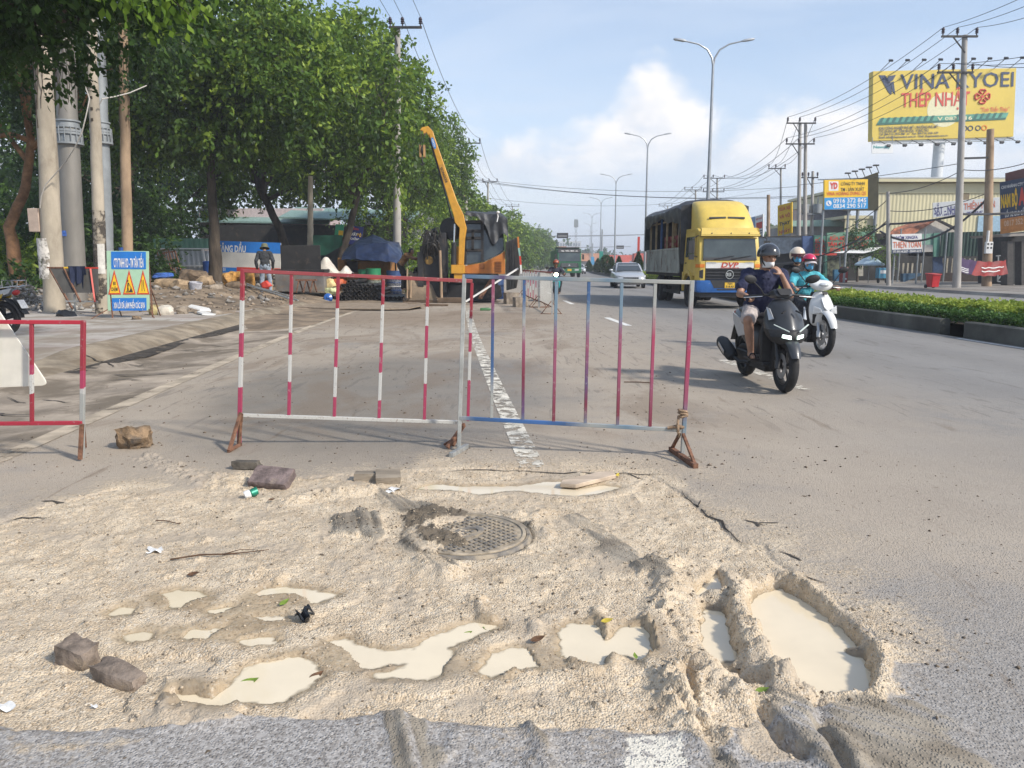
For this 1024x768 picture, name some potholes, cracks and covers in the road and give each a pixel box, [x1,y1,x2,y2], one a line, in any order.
crack [682,491,778,544]
manhole cover [403,513,532,560]
pothole [688,563,780,687]
pothole [734,570,887,701]
